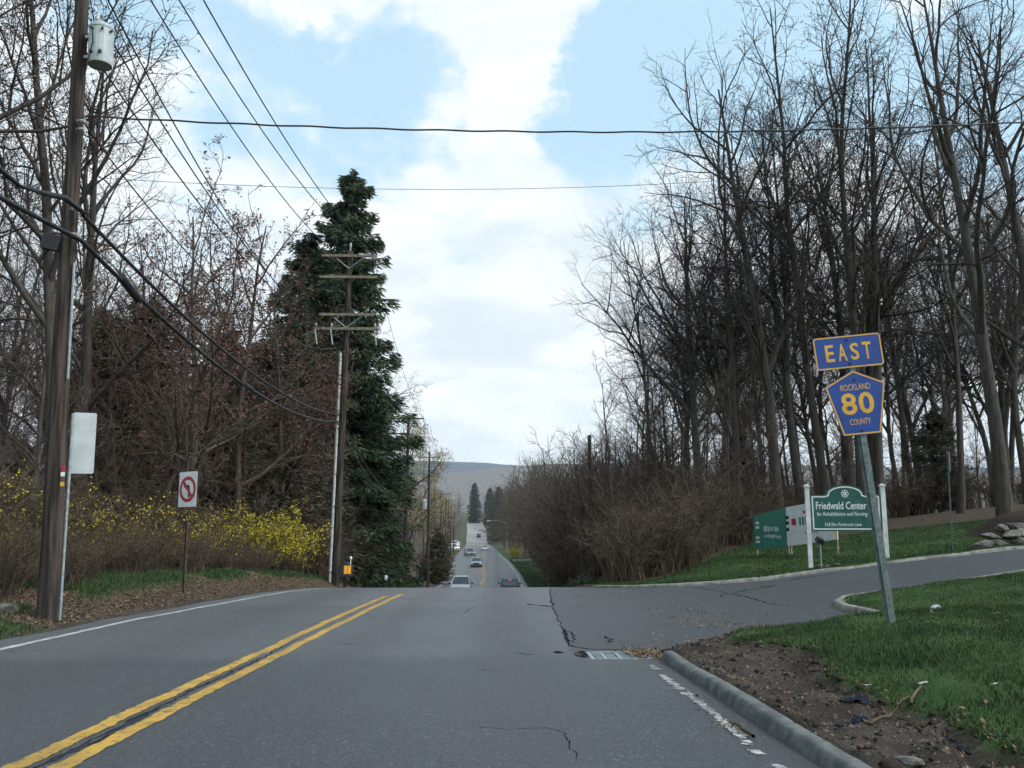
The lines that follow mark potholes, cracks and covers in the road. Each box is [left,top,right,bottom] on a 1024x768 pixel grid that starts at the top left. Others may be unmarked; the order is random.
crack [528,589,616,652]
drain grate [587,651,653,659]
crack [466,727,578,760]
